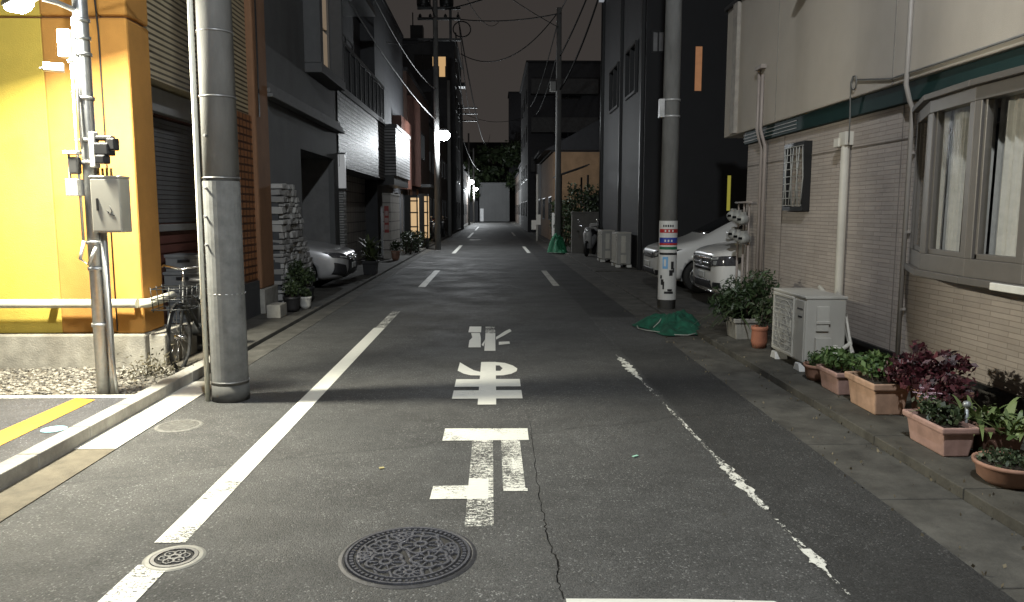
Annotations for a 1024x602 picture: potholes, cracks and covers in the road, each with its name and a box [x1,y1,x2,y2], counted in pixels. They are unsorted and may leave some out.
manhole cover [154,419,203,432]
crack [530,424,564,599]
manhole cover [338,526,477,589]
manhole cover [142,545,206,572]
